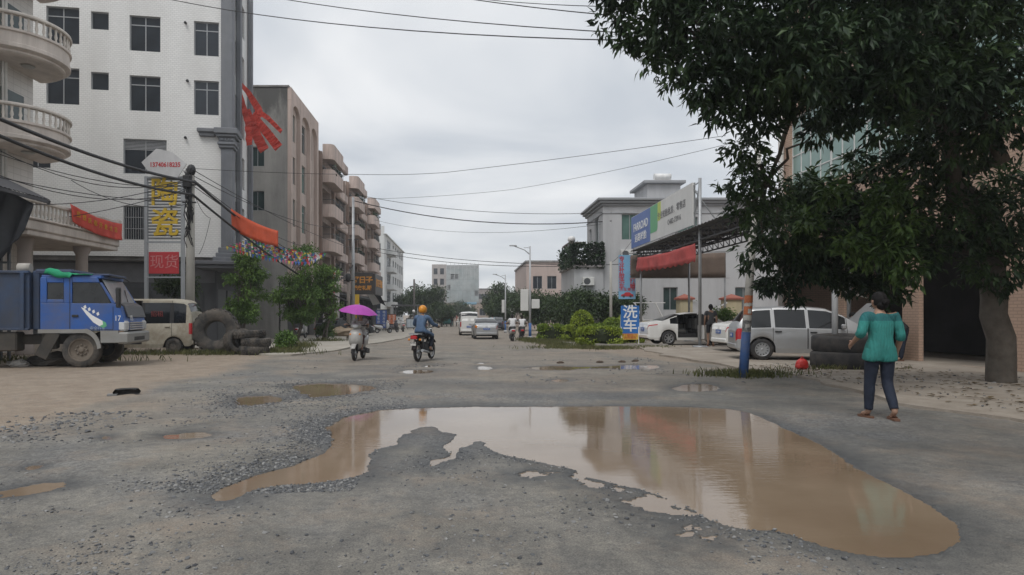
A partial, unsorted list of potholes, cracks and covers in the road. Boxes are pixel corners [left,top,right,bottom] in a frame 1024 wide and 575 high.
pothole [185,404,1001,568]
pothole [664,382,728,392]
pothole [148,429,228,441]
pothole [0,476,93,500]
pothole [224,393,292,407]
pothole [284,381,384,399]
